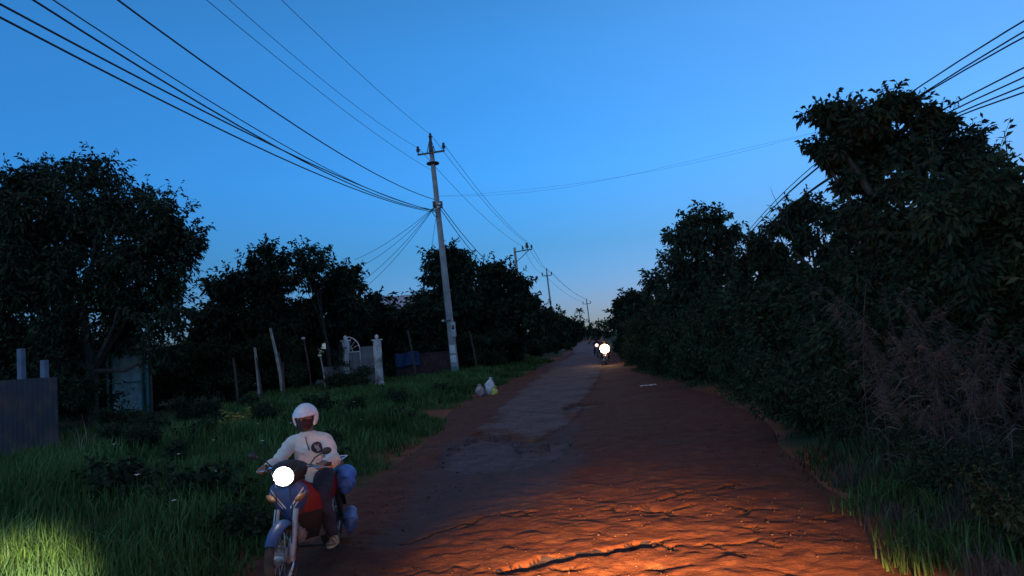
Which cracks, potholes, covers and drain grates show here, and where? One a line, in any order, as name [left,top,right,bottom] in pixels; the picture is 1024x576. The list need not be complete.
pothole [436,435,573,475]
crack [648,538,679,572]
